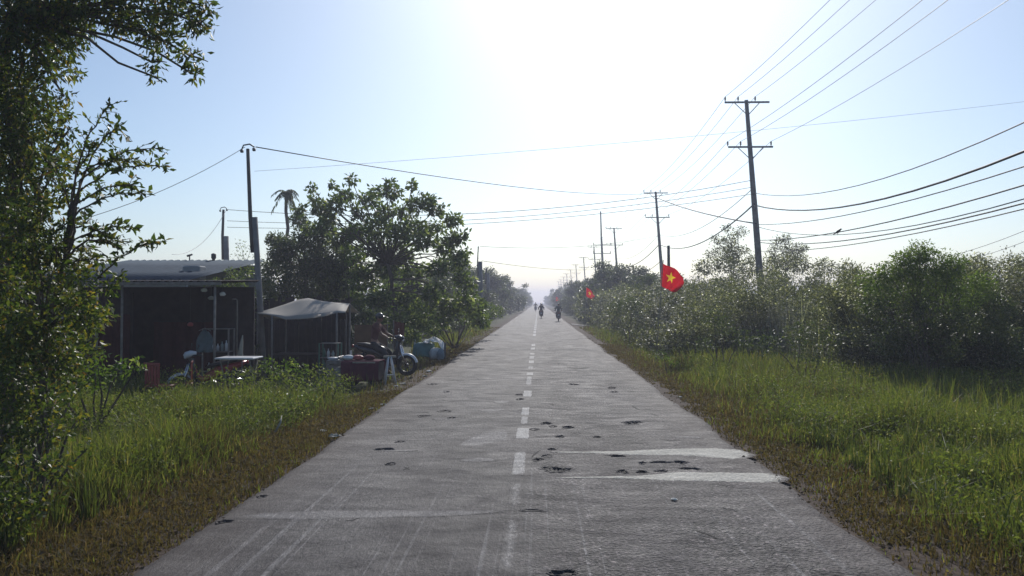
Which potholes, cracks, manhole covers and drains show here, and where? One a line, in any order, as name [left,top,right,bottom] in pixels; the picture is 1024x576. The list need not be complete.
pothole [546,568,579,576]
